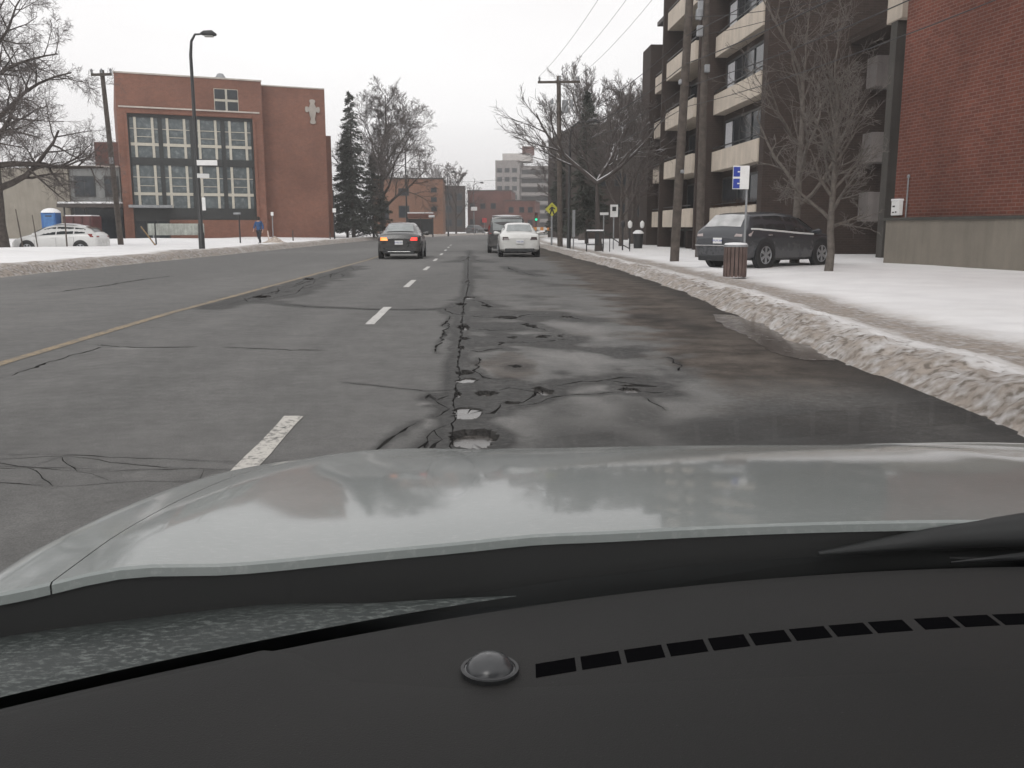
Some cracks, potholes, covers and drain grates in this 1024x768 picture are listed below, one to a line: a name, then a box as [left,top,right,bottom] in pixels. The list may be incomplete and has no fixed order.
pothole [531,386,555,396]
crack [0,454,222,486]
crack [214,268,665,414]
pothole [451,407,483,420]
pothole [448,428,500,449]
